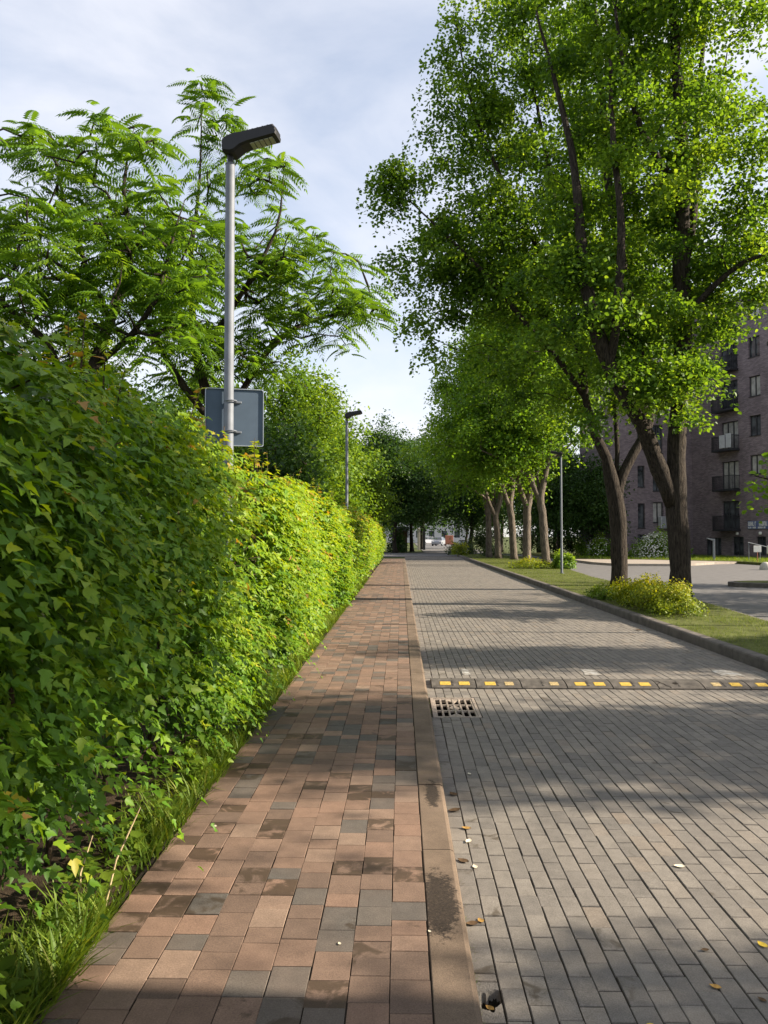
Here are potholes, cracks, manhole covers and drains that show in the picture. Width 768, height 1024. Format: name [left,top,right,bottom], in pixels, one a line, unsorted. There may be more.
drain grate [430,698,482,718]
